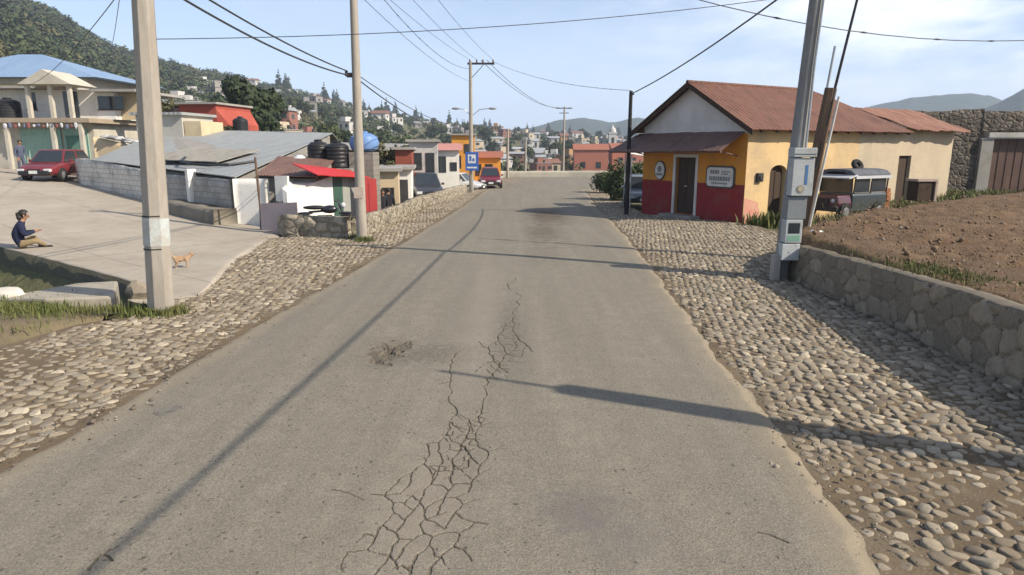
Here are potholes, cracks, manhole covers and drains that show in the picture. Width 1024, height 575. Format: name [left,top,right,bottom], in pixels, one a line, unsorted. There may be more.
pothole [365,340,413,369]
crack [330,278,533,575]
